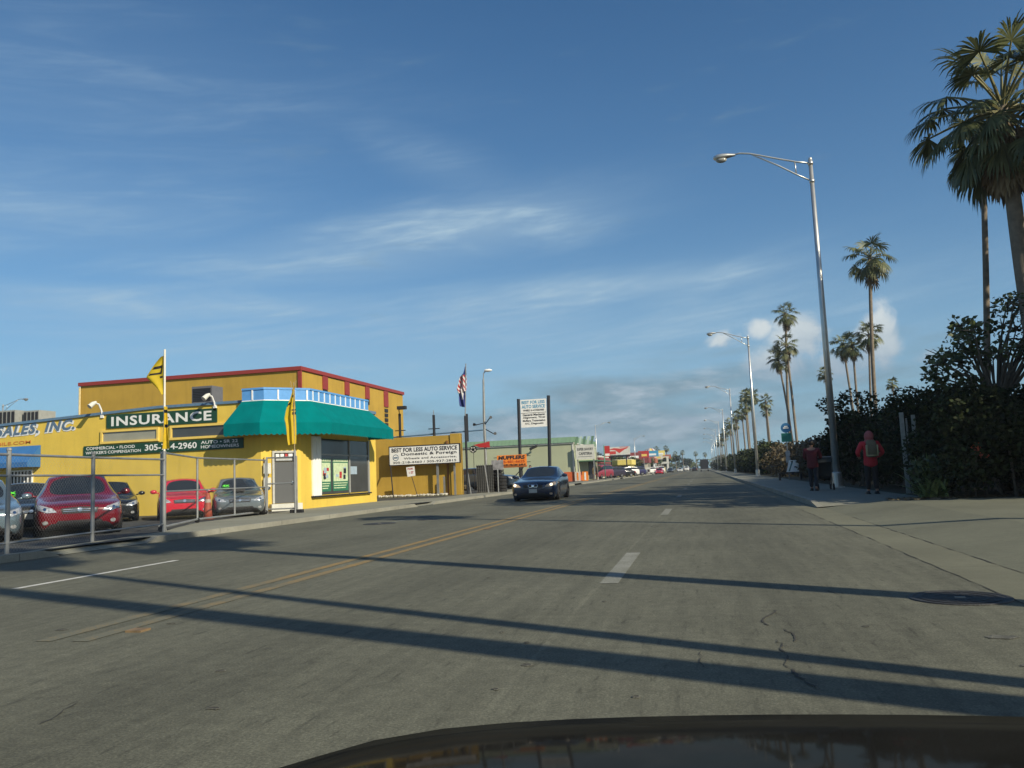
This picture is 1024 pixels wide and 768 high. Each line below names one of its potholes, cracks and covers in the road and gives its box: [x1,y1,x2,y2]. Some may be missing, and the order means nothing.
crack [761,610,816,687]
manhole cover [908,590,1015,605]
